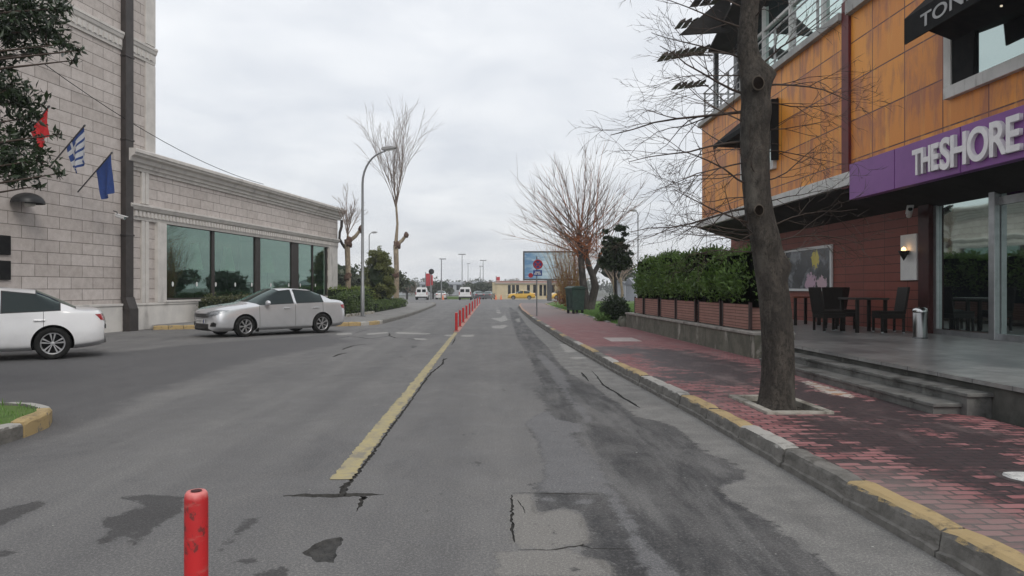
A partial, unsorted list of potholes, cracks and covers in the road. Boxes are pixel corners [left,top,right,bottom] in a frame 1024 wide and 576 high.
crack [285,330,456,511]
crack [581,371,640,408]
crack [509,493,632,550]
